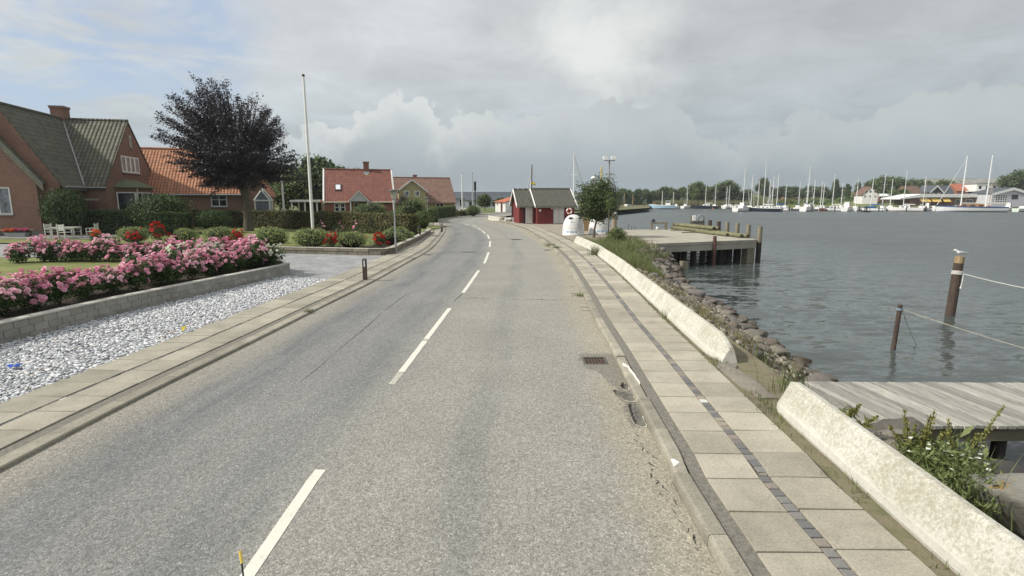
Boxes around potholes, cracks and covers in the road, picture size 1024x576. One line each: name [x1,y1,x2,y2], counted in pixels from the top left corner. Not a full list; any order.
pothole [611,388,636,402]
pothole [628,401,647,428]
